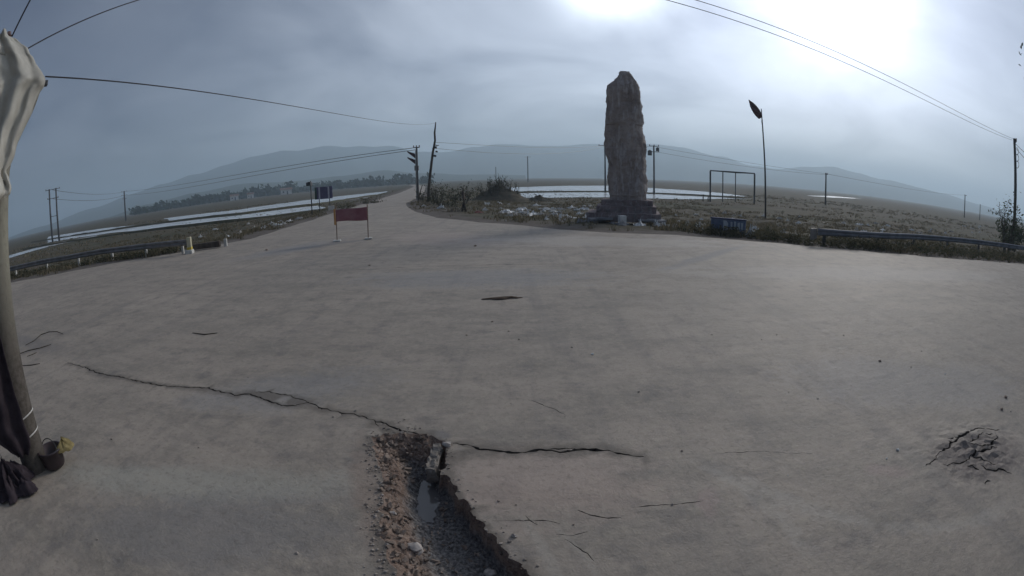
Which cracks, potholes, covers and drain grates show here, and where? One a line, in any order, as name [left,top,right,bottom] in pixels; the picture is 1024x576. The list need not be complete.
crack [926,428,1010,484]
pothole [372,432,530,576]
crack [453,443,644,457]
crack [506,510,621,561]
crack [74,364,418,434]
